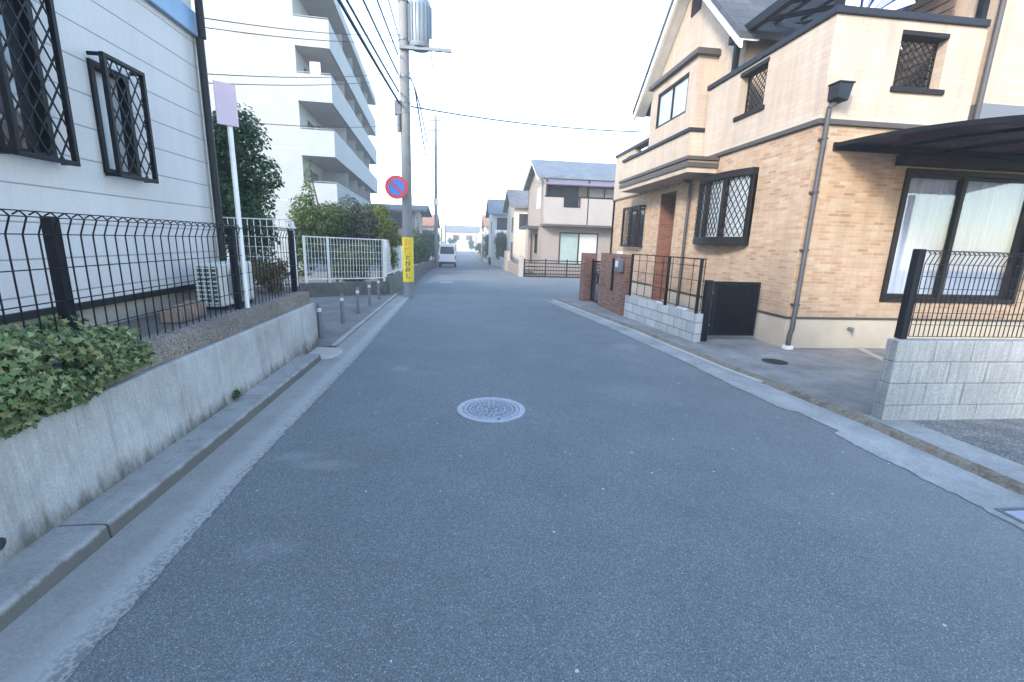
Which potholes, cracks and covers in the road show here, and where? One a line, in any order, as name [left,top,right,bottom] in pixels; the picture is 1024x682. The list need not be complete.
manhole cover [457,397,525,423]
